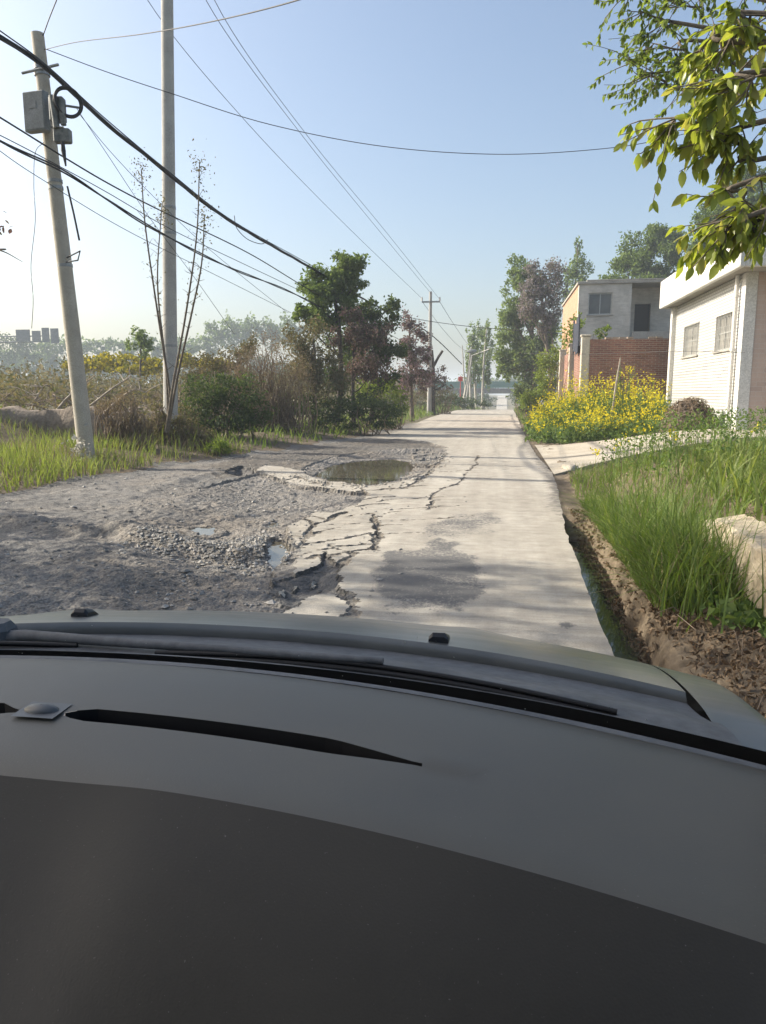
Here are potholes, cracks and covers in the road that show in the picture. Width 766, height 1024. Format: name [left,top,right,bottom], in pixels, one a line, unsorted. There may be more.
crack [339,591,362,618]
pothole [0,473,370,617]
crack [282,453,480,566]
pothole [301,448,447,486]
